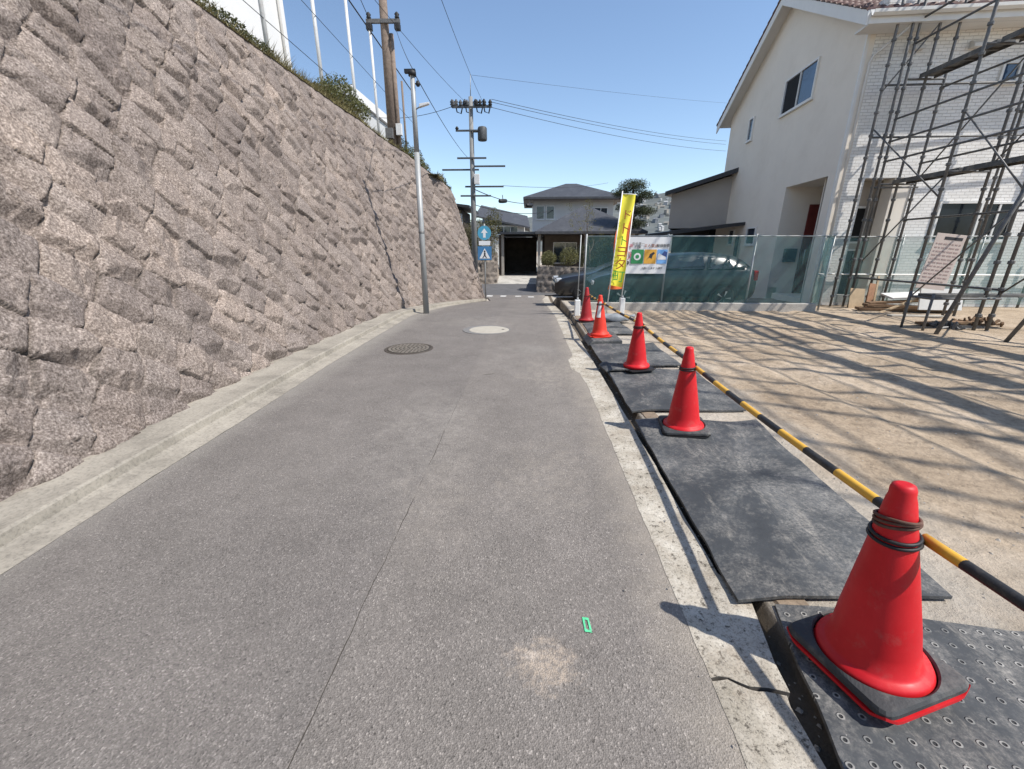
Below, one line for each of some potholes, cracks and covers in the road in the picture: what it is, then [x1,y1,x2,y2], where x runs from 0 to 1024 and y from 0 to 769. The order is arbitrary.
manhole cover [384,343,433,355]
manhole cover [463,325,510,334]
